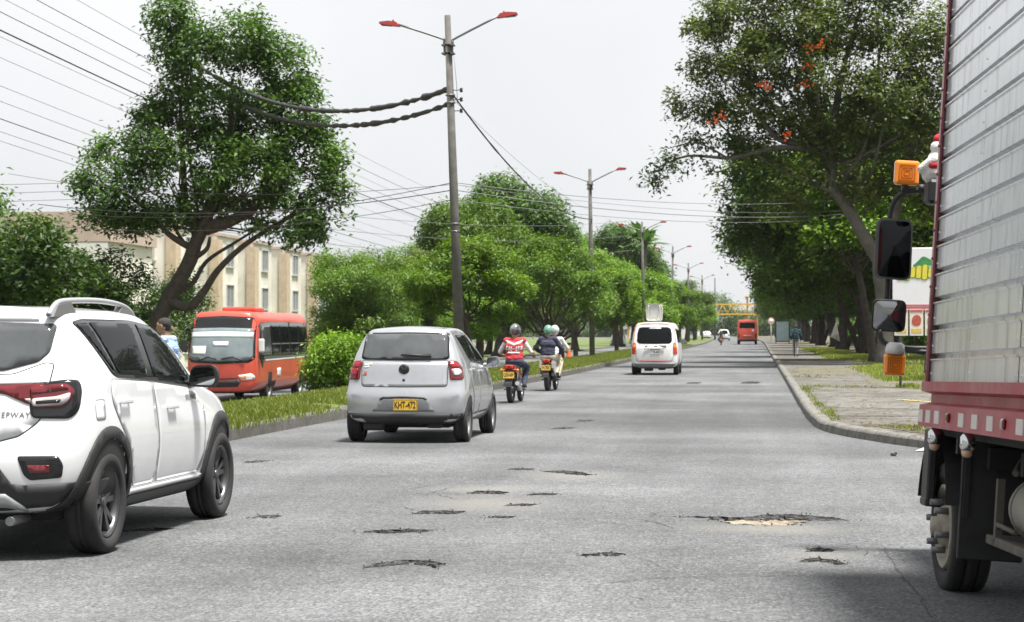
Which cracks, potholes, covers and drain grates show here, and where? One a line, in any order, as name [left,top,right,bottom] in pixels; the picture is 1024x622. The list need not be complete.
pothole [659,512,862,526]
pothole [800,555,849,565]
pothole [361,559,447,569]
